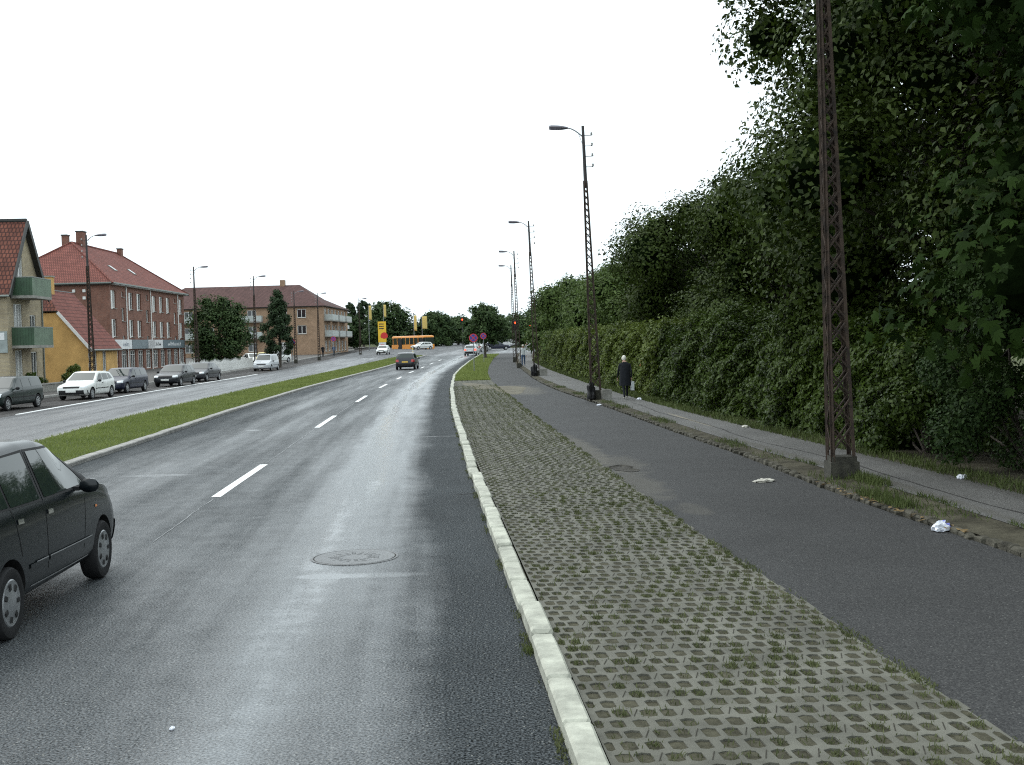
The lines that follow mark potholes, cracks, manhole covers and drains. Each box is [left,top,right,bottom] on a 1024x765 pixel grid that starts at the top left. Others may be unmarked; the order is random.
manhole cover [311,549,399,565]
